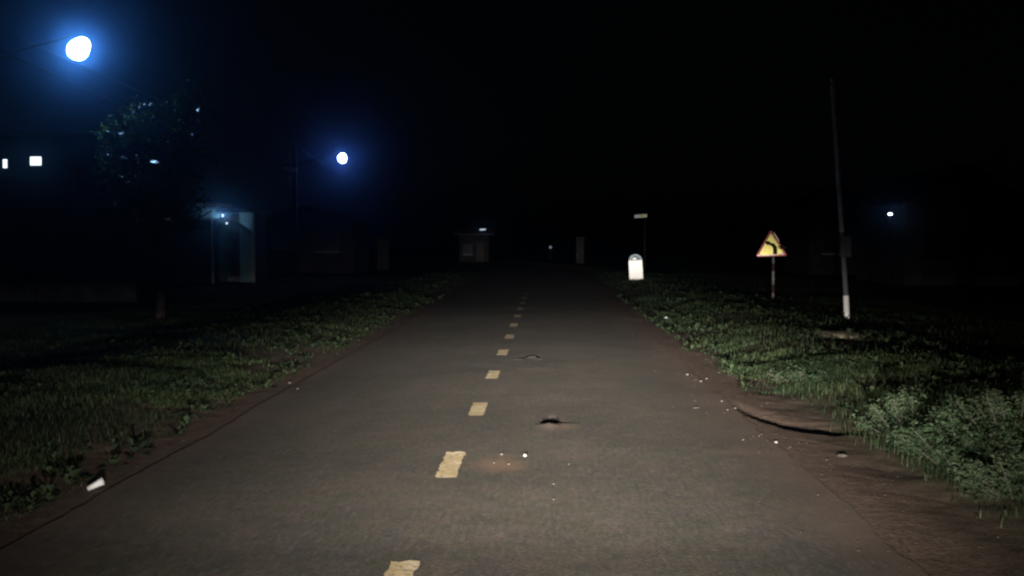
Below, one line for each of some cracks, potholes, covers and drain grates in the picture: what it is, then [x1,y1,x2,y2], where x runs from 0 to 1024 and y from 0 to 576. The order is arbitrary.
pothole [539,415,580,424]
